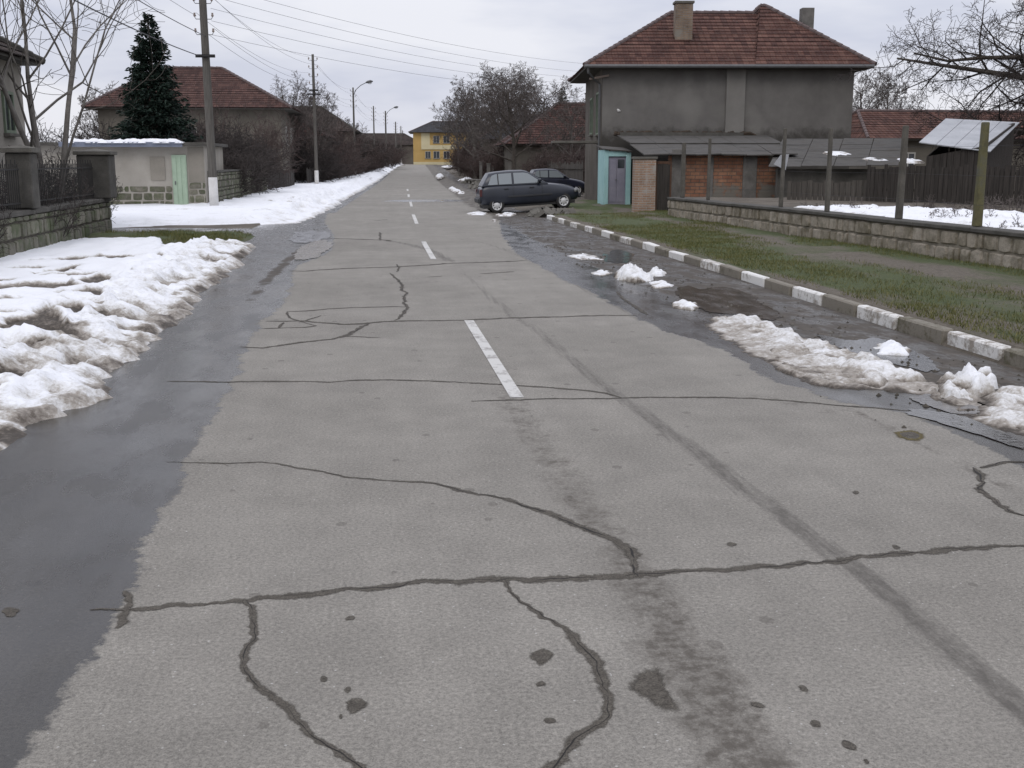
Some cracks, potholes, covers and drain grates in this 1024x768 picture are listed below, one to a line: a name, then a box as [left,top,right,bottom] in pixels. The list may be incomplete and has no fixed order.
crack [247,260,648,348]
crack [90,461,1024,768]
crack [173,379,908,411]
